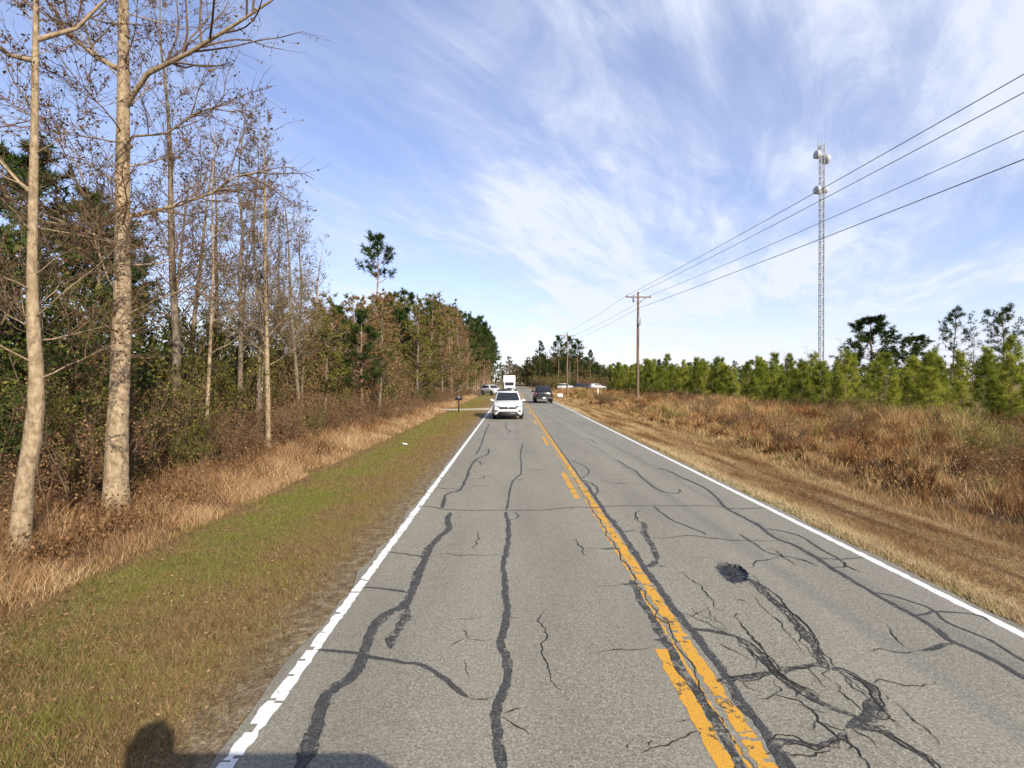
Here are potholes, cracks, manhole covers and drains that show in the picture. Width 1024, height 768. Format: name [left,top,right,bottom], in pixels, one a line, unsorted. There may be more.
pothole [715,561,752,585]
crack [538,612,560,689]
crack [418,423,760,567]
